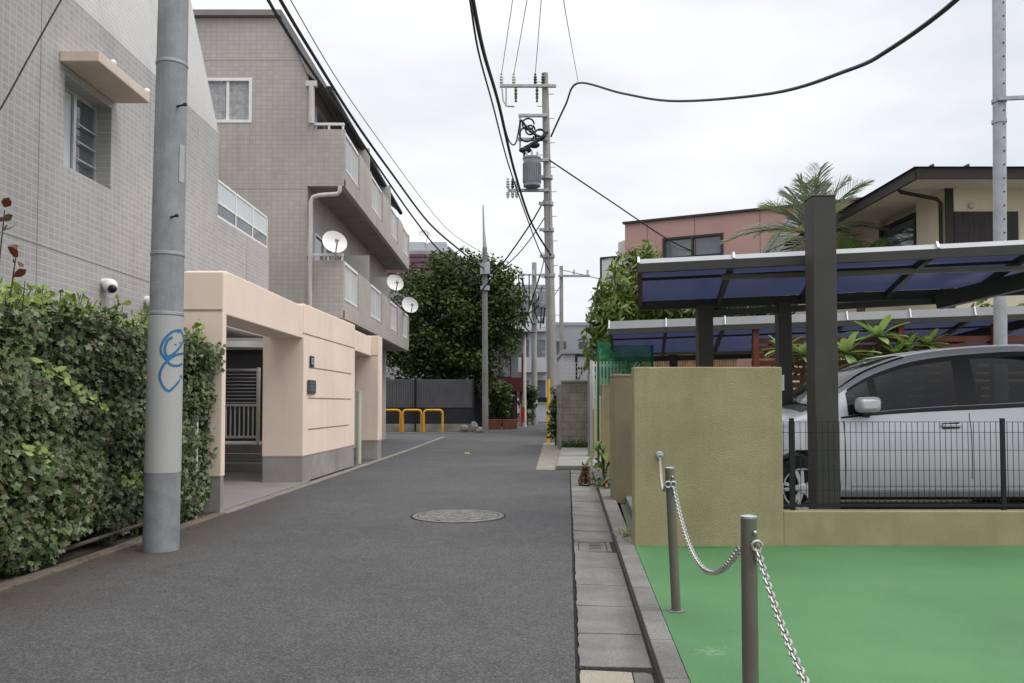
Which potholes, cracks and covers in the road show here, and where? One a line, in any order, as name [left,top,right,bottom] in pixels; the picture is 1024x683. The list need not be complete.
manhole cover [410,509,506,523]
